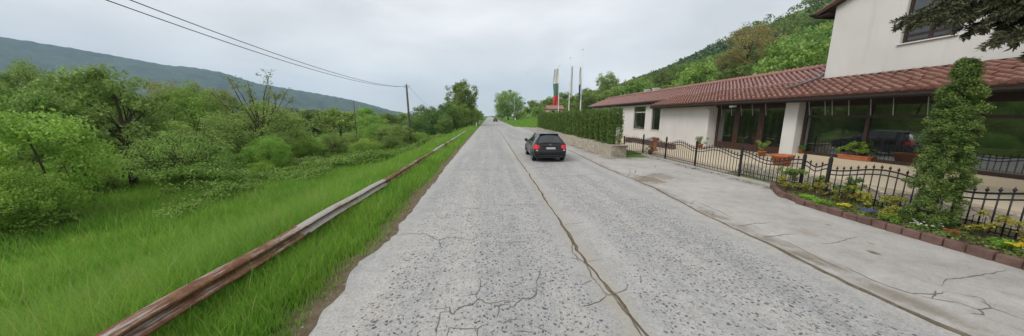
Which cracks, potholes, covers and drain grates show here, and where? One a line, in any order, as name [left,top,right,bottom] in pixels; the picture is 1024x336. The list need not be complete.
crack [408,130,1014,336]
